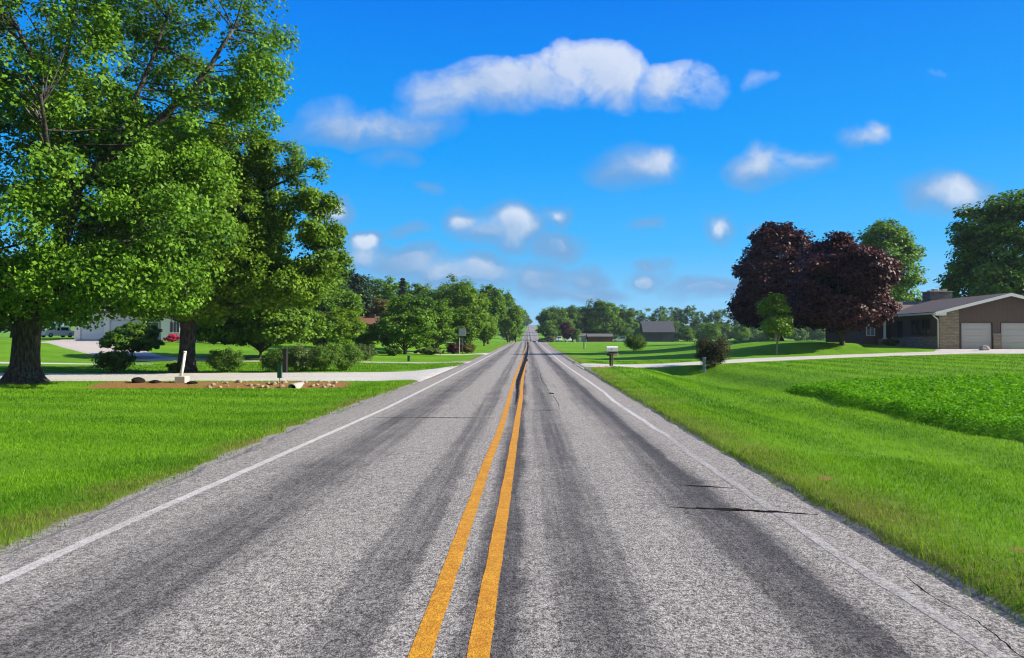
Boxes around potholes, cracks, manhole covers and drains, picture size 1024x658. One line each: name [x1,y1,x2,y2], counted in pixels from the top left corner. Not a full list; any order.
crack [675,507,818,515]
crack [905,575,1024,658]
